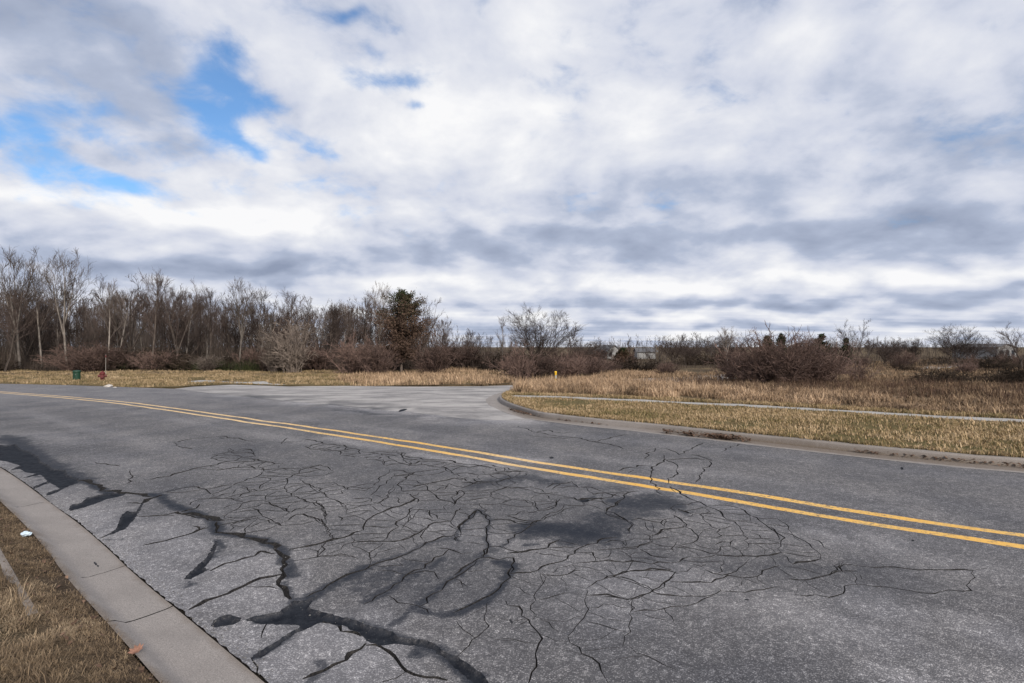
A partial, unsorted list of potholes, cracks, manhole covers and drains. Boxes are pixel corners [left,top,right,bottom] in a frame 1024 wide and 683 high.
crack [518,426,622,448]
crack [150,436,985,683]
